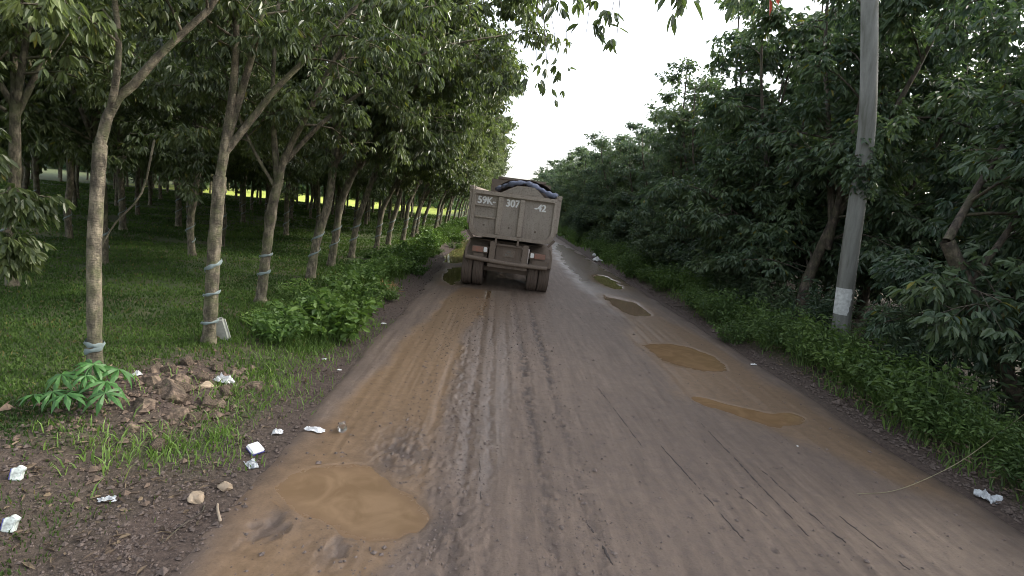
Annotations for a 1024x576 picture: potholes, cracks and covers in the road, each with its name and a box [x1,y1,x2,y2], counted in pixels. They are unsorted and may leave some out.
pothole [441,266,462,285]
pothole [265,462,436,543]
crack [661,423,910,570]
pothole [601,295,654,317]
pothole [592,274,626,290]
pothole [683,393,810,429]
pothole [642,341,731,373]
